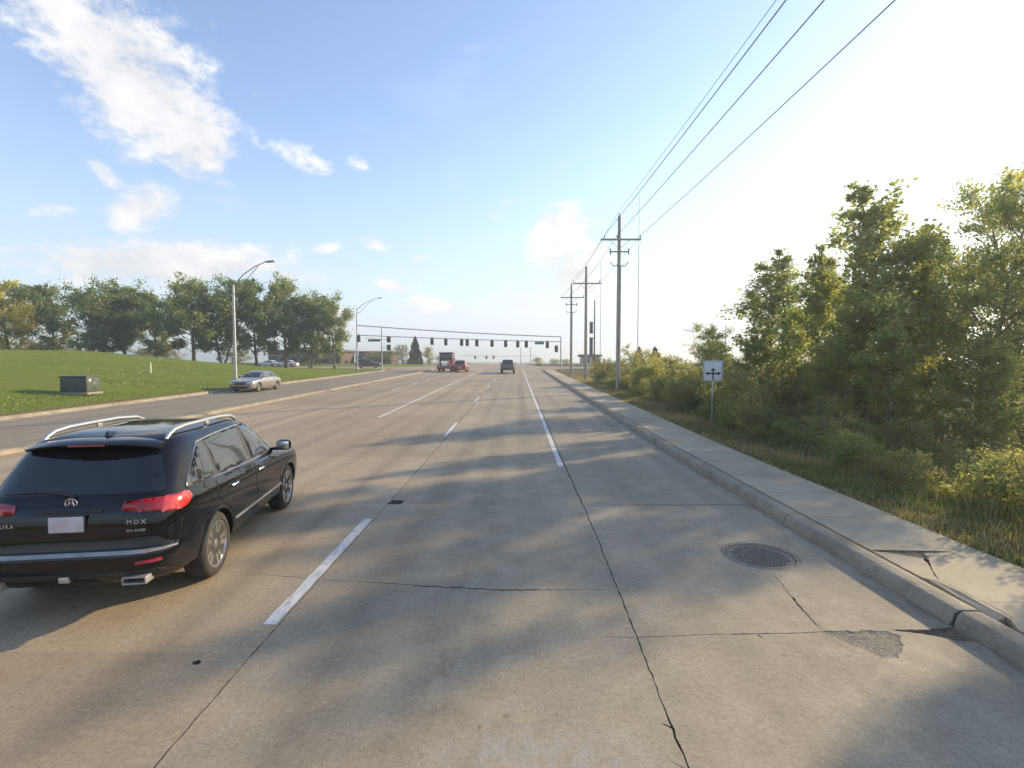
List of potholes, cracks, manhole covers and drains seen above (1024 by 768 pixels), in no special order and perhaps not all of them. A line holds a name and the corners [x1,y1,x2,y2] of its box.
crack [926,559,1012,626]
crack [638,571,821,638]
manhole cover [720,543,802,571]
